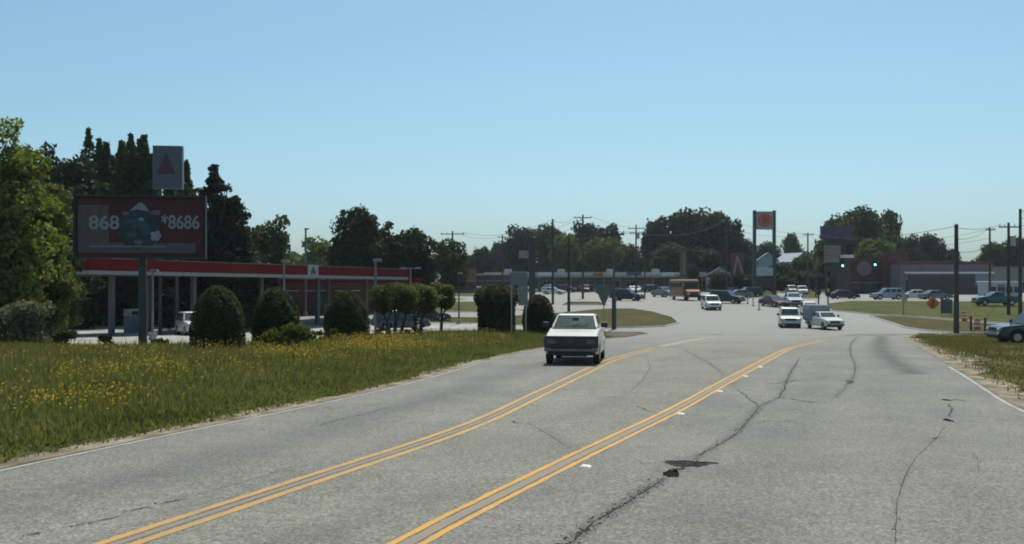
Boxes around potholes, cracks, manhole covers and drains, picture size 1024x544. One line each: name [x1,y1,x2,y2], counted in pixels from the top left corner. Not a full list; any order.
pothole [663,460,720,477]
crack [556,353,817,544]
crack [890,399,964,544]
crack [835,338,856,398]
